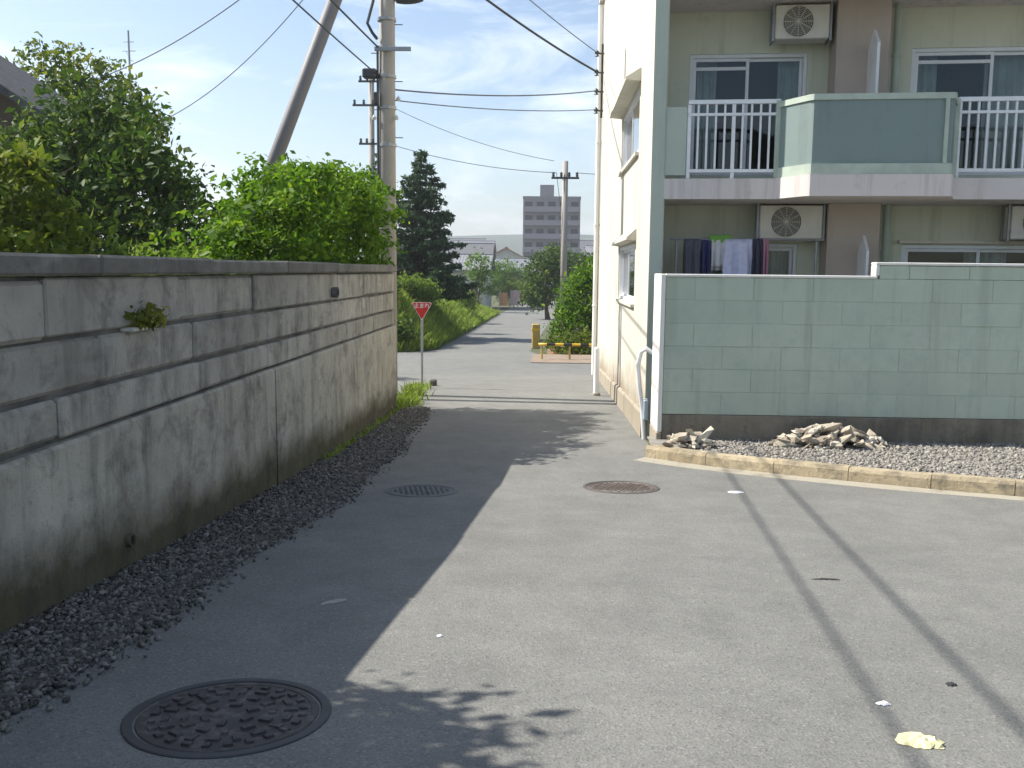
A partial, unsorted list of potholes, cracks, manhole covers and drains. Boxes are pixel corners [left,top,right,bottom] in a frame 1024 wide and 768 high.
manhole cover [583,481,660,494]
manhole cover [120,678,332,759]
manhole cover [385,484,458,497]
